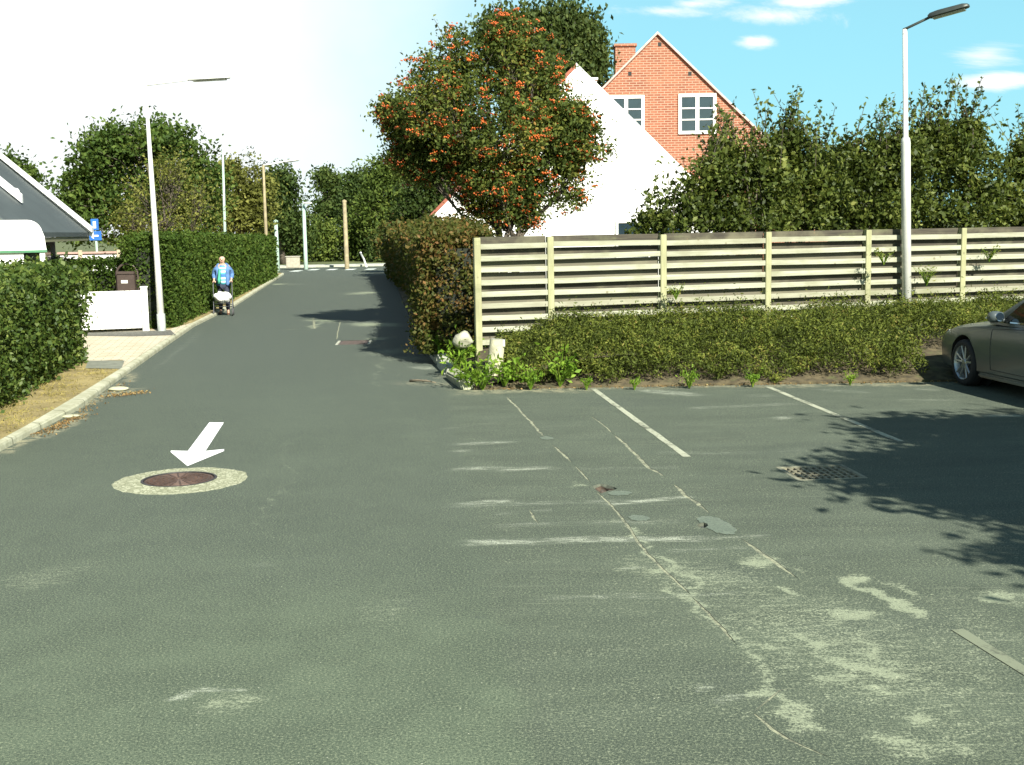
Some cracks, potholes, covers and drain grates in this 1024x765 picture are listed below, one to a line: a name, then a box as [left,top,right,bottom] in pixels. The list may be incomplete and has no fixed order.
drain grate [776,464,868,481]
manhole cover [112,467,248,495]
pothole [593,484,617,493]
